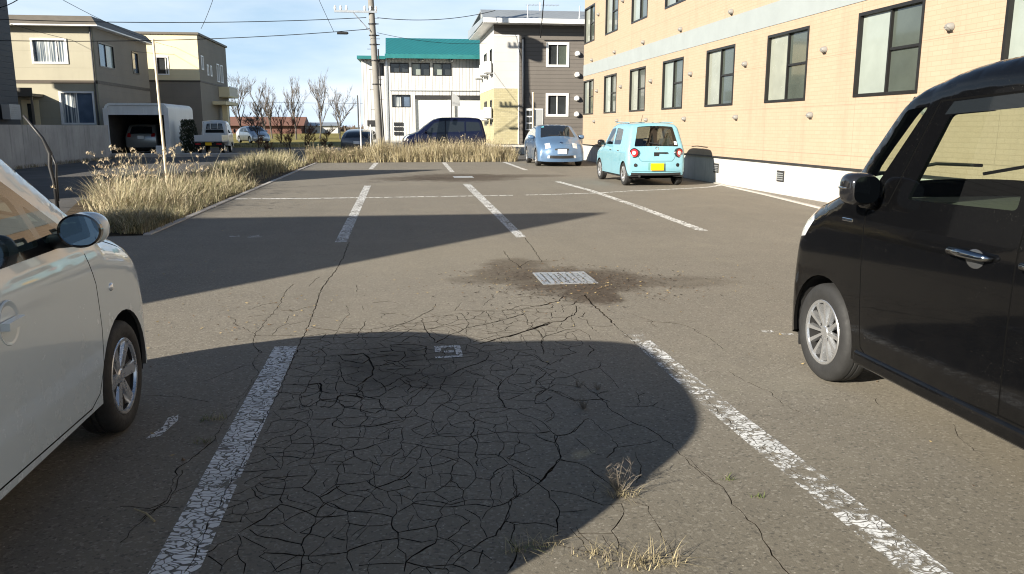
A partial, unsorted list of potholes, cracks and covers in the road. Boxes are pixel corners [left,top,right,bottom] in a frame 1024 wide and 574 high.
crack [120,277,319,543]
crack [584,295,925,562]
crack [205,285,715,574]
drain grate [533,271,598,285]
